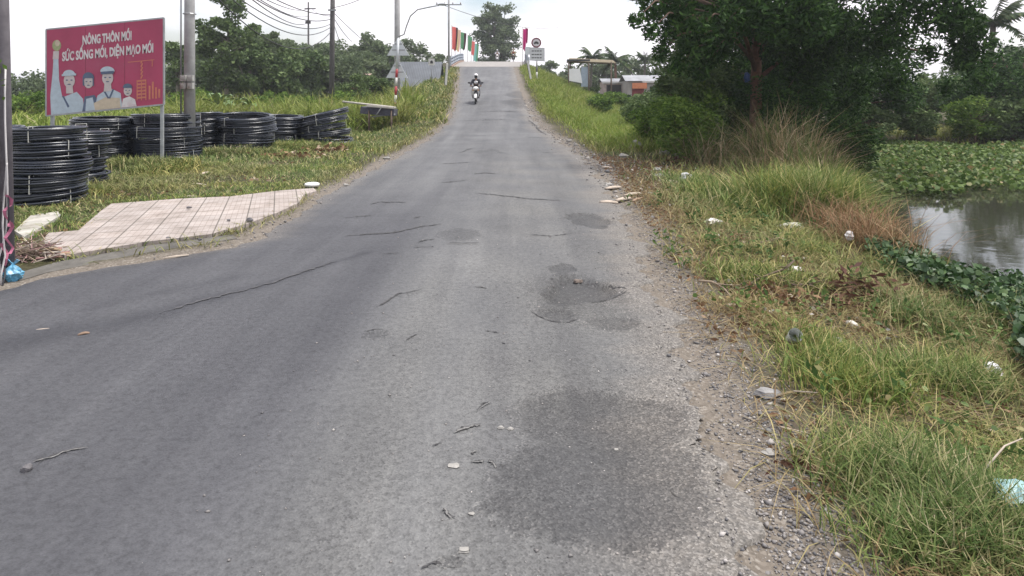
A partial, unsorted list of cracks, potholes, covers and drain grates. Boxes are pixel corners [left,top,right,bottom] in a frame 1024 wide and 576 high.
crack [347,201,441,247]
